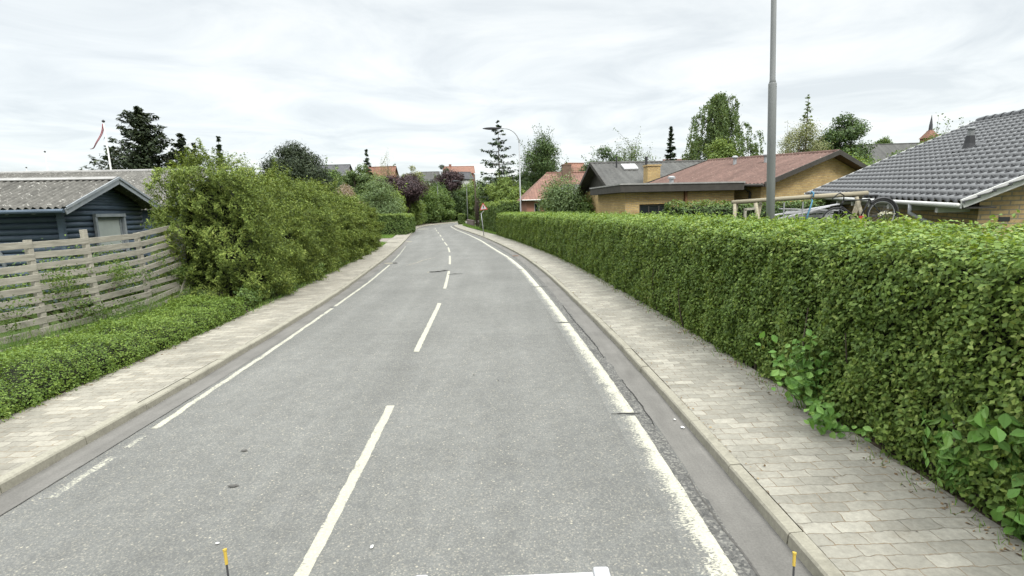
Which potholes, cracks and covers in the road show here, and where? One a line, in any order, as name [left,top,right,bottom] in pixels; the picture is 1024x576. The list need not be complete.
crack [555,306,604,358]
crack [612,379,655,426]
